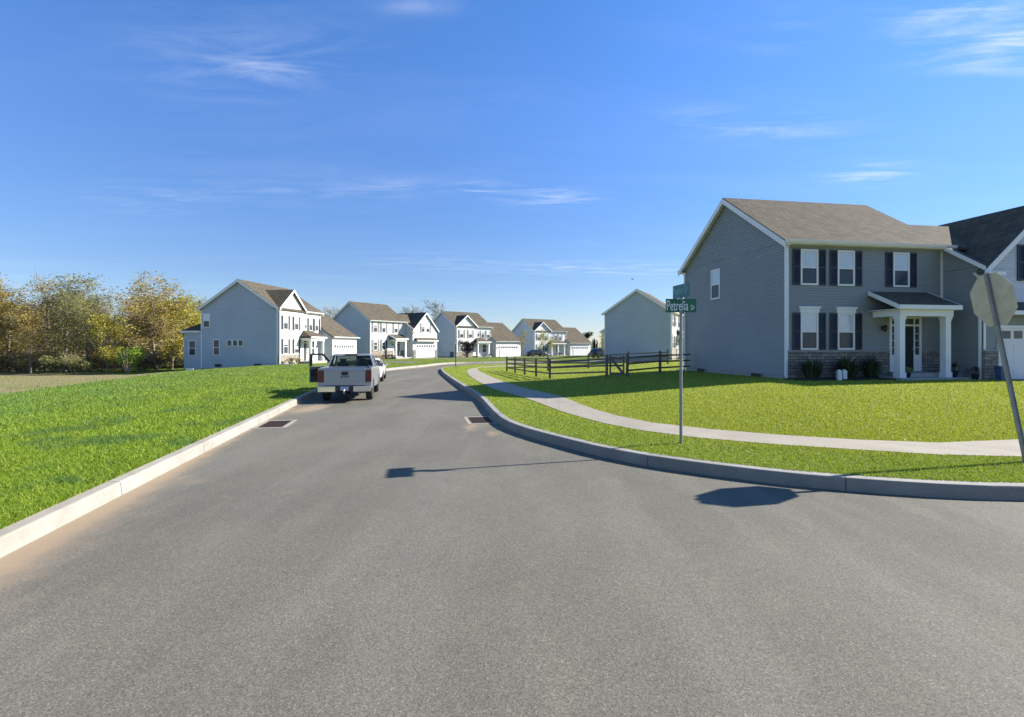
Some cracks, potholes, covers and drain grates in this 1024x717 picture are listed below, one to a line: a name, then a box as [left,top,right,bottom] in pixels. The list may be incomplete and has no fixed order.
drain grate [250,420,297,429]
drain grate [464,416,498,424]
